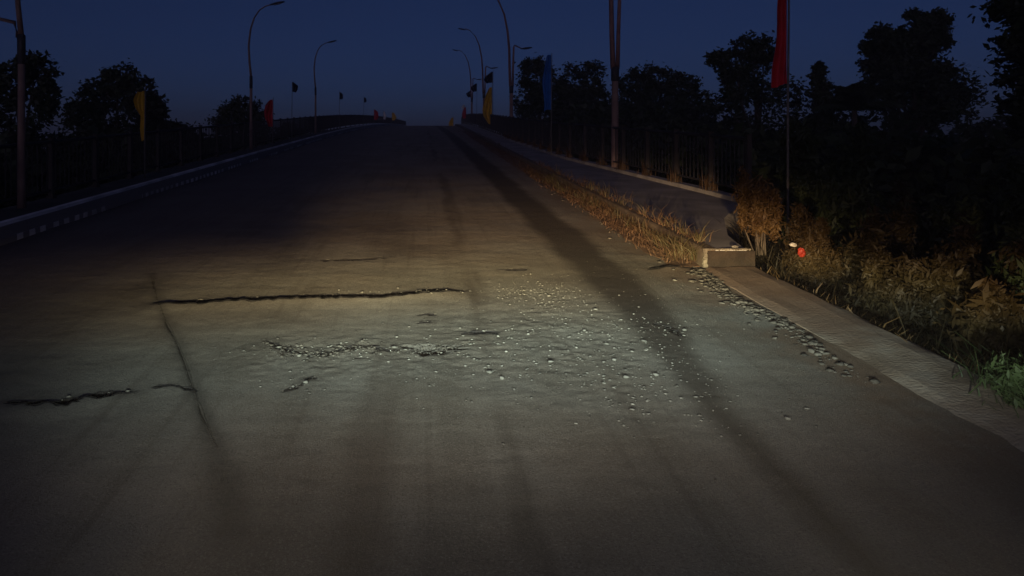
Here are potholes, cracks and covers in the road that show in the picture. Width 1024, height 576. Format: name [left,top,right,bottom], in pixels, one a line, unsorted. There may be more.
crack [152,281,462,448]
crack [6,390,133,406]
pothole [398,343,471,357]
